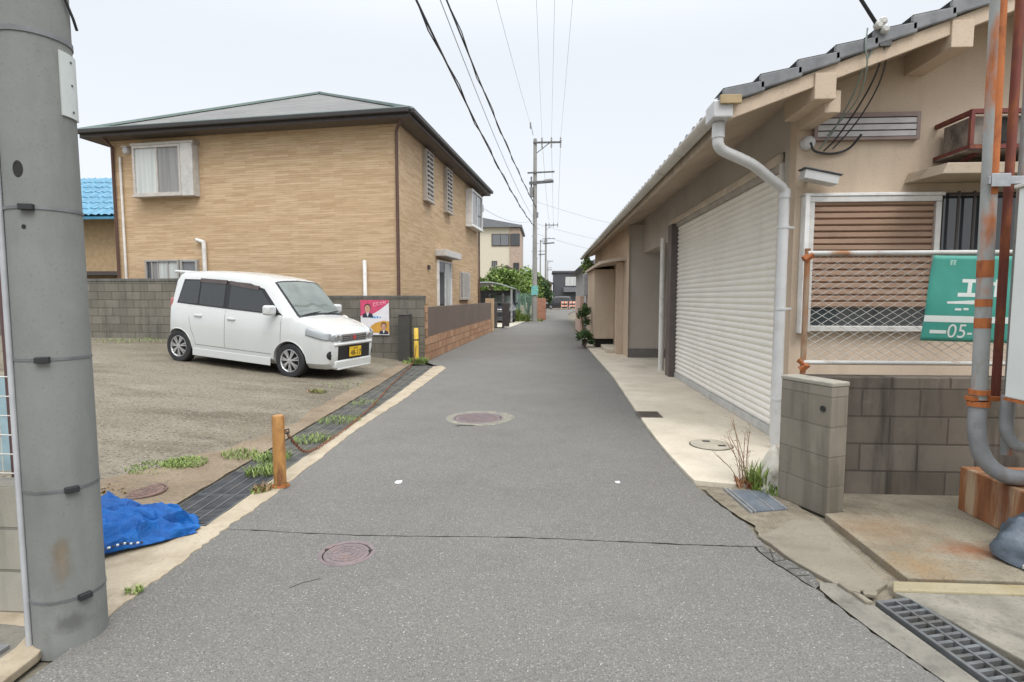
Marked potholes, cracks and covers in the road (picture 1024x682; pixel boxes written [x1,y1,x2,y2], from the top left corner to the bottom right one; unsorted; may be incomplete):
drain grate [198,471,273,496]
manhole cover [124,483,168,500]
drain grate [336,403,383,413]
drain grate [317,412,369,423]
drain grate [237,452,310,472]
manhole cover [317,541,375,566]
drain grate [296,423,354,436]
manhole cover [689,439,734,451]
drain grate [270,436,333,453]
drain grate [179,494,248,526]
drain grate [724,488,788,513]
